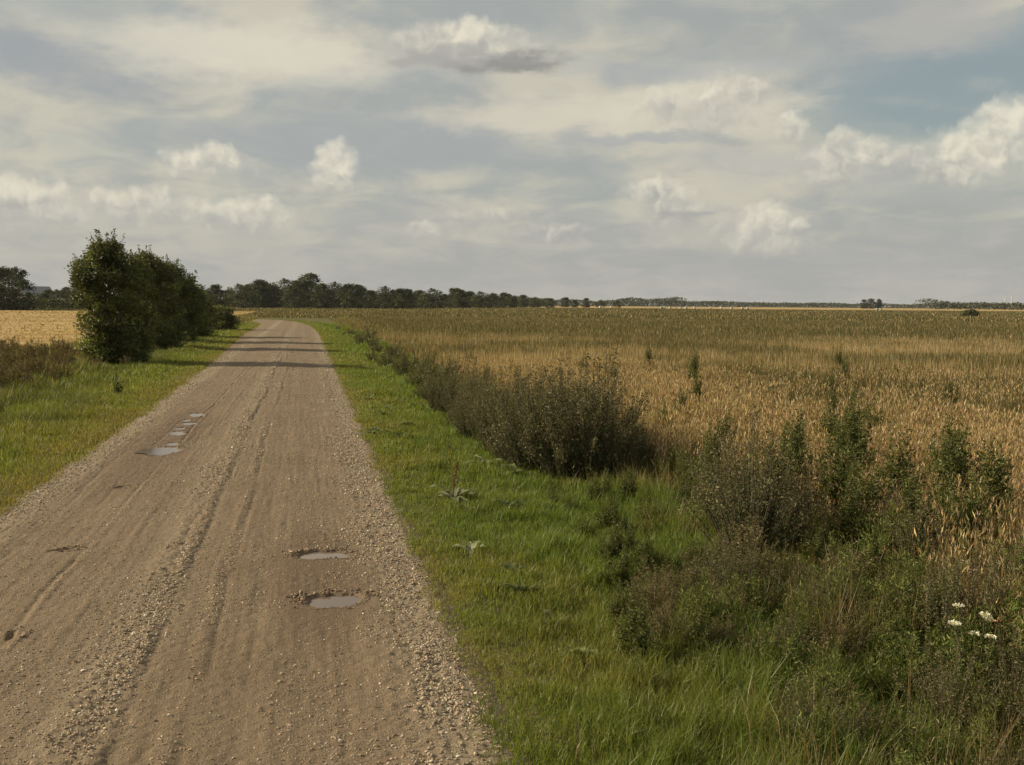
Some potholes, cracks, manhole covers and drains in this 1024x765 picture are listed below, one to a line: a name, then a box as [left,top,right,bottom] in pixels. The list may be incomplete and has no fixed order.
pothole [128,444,191,457]
pothole [44,544,88,552]
pothole [283,588,379,610]
pothole [271,546,364,560]
